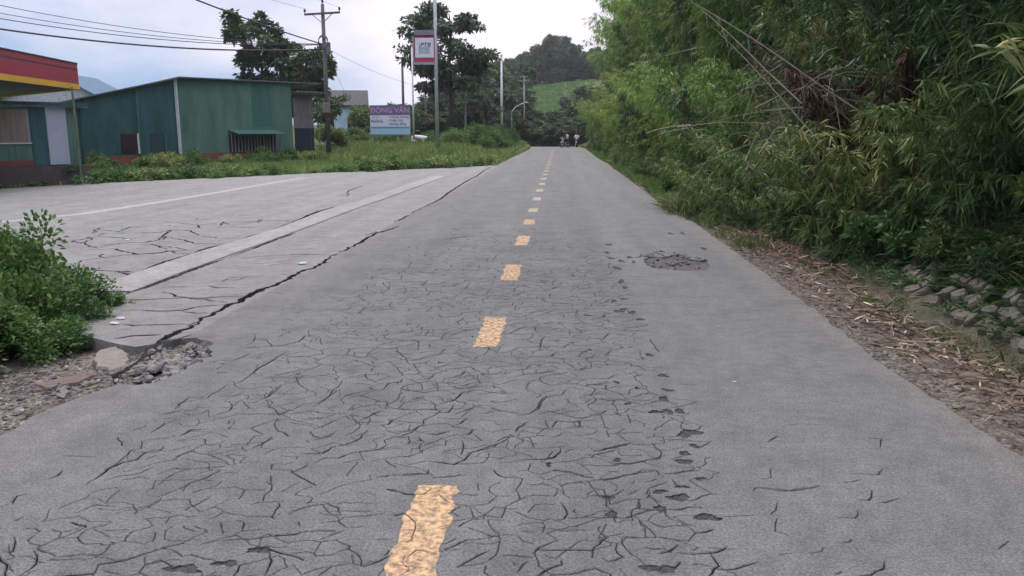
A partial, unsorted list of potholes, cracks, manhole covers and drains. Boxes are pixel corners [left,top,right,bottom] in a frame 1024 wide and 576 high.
pothole [111,338,213,386]
crack [0,169,756,576]
pothole [644,255,710,271]
